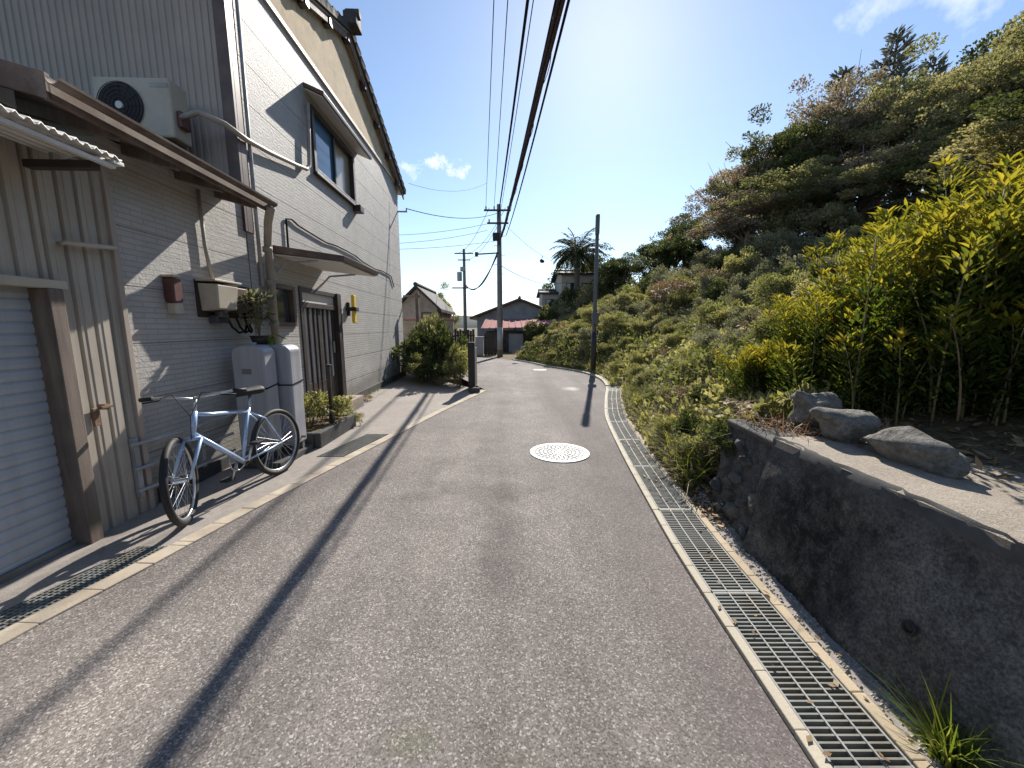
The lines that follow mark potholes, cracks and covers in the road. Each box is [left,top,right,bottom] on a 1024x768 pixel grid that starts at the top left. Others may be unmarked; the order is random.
manhole cover [530,443,590,463]
